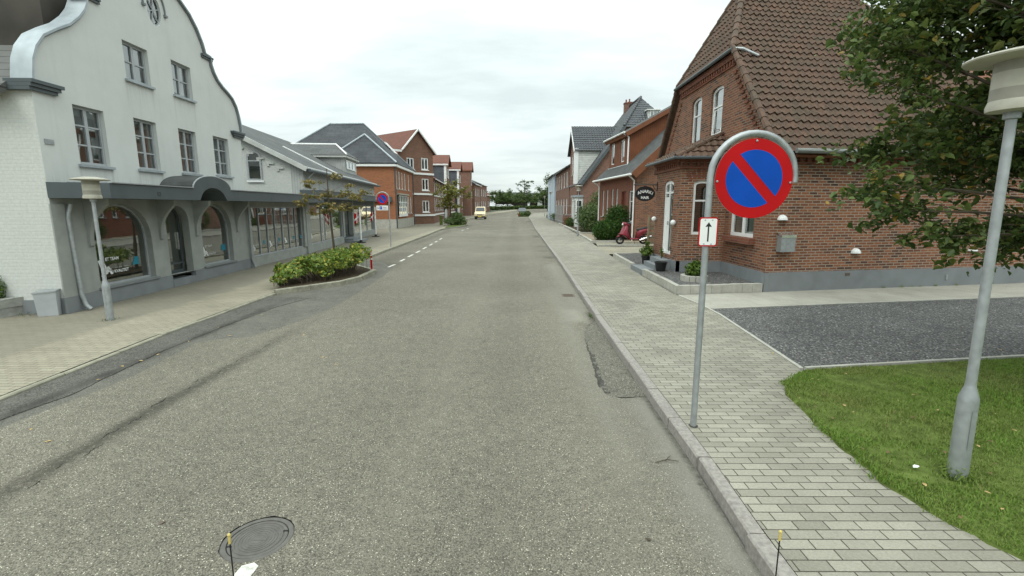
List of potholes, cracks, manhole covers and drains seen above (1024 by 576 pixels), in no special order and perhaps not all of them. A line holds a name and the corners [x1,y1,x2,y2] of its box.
manhole cover [218,517,295,563]
